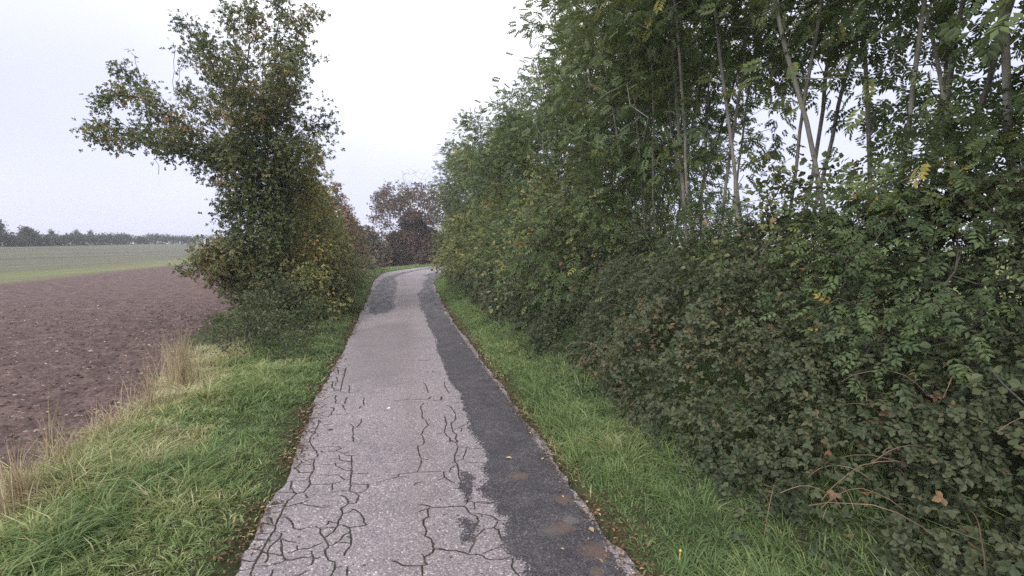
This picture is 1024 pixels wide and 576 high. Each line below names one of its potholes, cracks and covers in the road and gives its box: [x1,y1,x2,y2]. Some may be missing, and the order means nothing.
crack [229,359,522,576]
